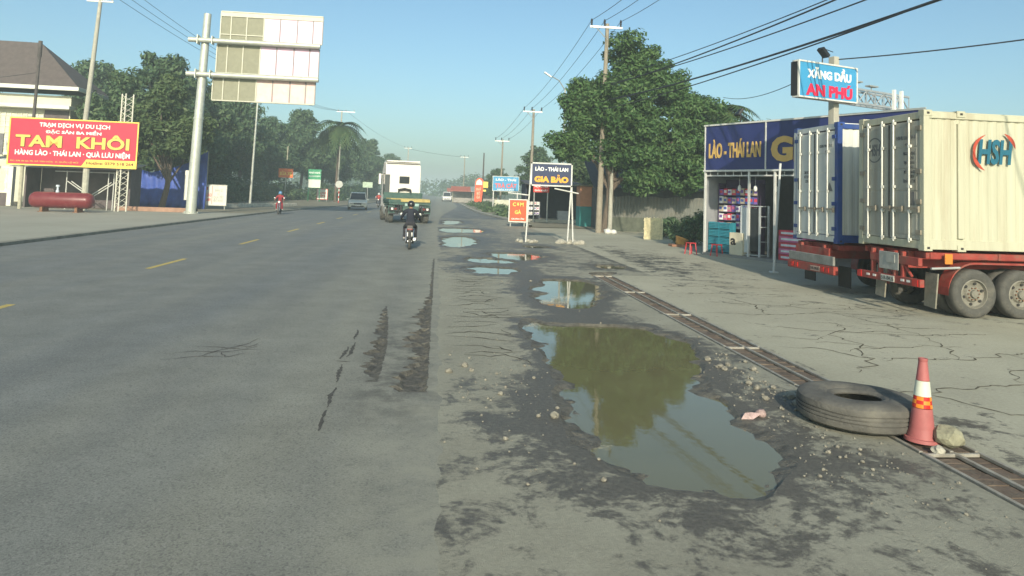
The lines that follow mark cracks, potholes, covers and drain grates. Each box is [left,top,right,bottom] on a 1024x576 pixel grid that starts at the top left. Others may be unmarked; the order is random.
pothole [459,265,522,274]
pothole [480,252,551,260]
crack [318,330,359,431]
crack [161,338,260,360]
crack [446,274,530,363]
pothole [527,278,613,309]
pothole [439,236,481,247]
pothole [518,318,798,501]
